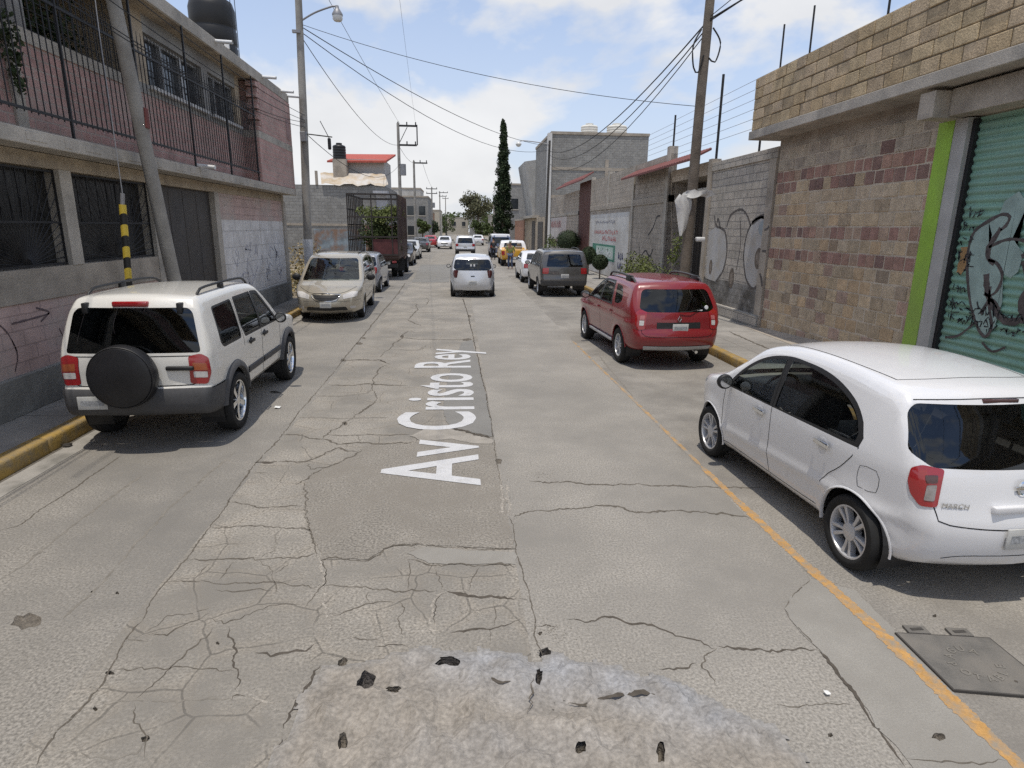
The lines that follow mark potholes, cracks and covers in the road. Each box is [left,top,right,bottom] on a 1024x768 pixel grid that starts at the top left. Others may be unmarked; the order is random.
crack [514,505,749,518]
crack [532,481,759,489]
crack [539,616,813,681]
crack [0,299,526,761]
manhole cover [894,625,1024,698]
